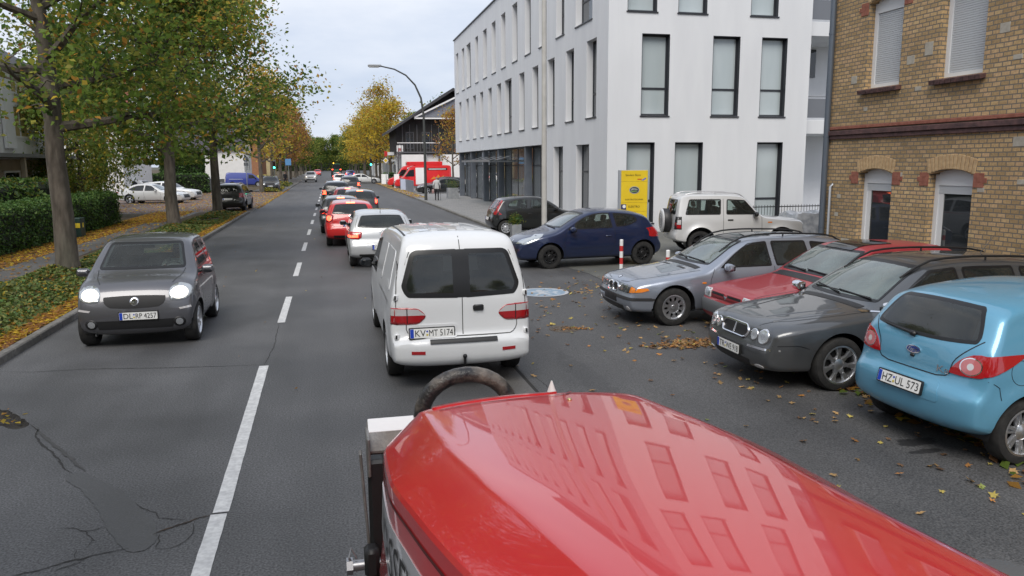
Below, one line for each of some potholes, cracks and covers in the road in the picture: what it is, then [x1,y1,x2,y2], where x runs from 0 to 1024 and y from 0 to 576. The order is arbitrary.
crack [136,503,210,549]
crack [14,525,127,576]
pothole [0,410,29,429]
crack [30,424,69,472]
